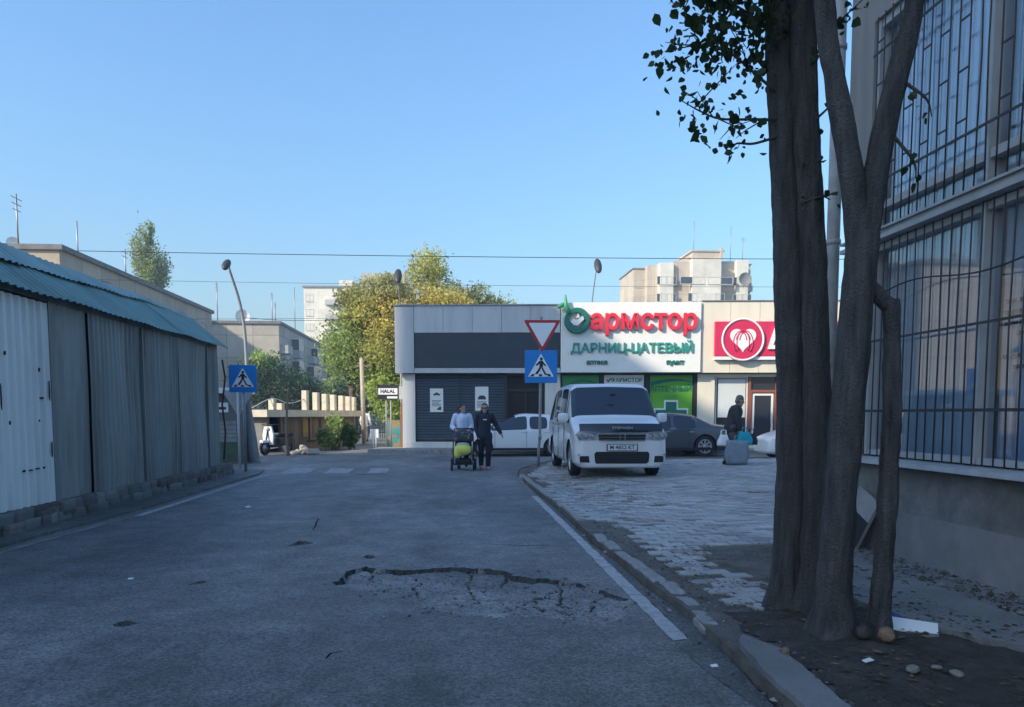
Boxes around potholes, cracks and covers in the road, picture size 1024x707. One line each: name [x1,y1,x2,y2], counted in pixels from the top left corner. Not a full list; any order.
pothole [323,564,637,623]
